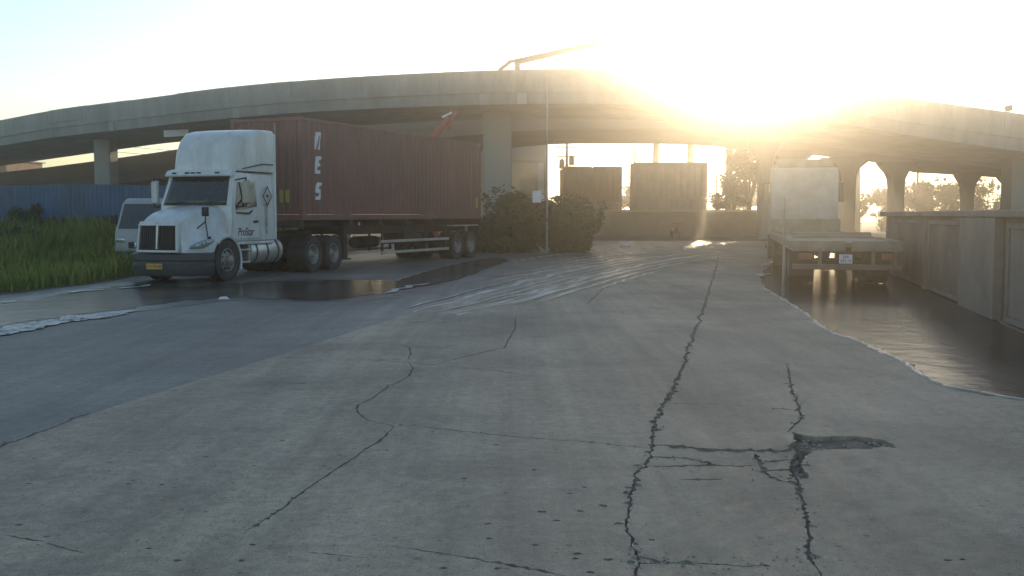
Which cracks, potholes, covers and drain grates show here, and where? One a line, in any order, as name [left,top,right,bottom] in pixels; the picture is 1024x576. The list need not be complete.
crack [649,363,822,576]
pothole [787,432,897,485]
crack [246,316,532,532]
